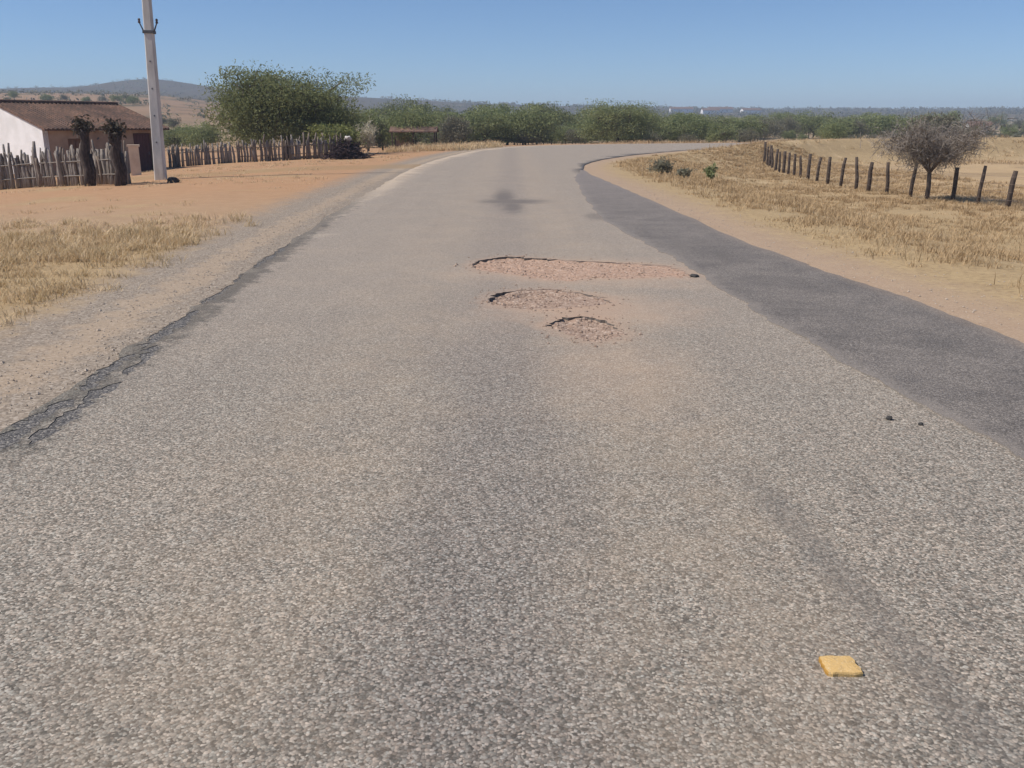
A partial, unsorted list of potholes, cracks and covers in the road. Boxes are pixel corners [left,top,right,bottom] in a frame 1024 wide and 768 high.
pothole [531,310,643,347]
pothole [454,254,691,283]
crack [0,244,290,450]
pothole [474,284,631,313]
